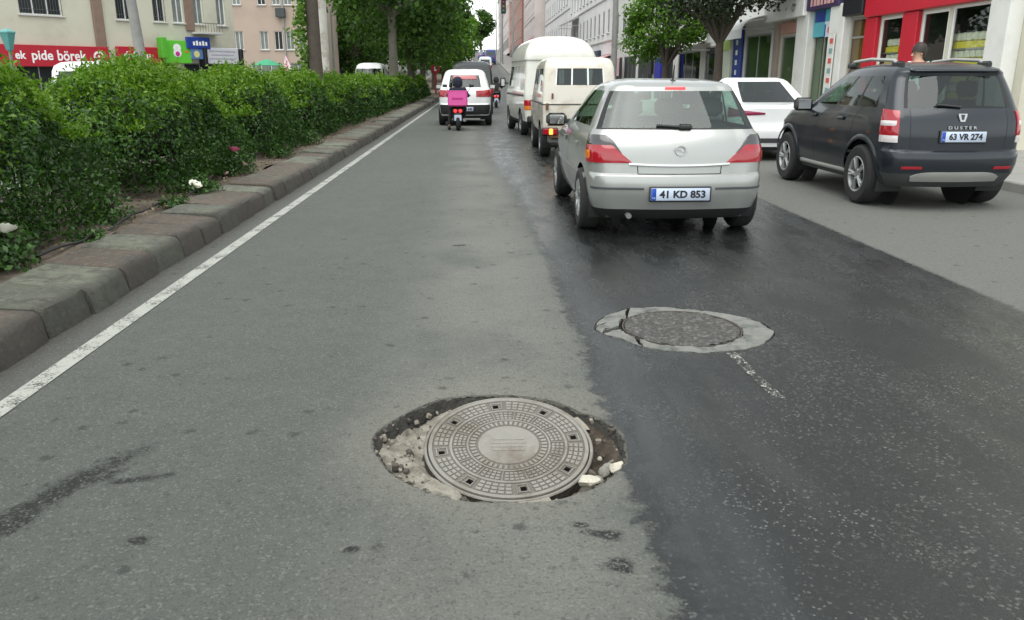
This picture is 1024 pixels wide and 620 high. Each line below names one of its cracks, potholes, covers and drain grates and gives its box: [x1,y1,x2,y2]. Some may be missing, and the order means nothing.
manhole cover [622,311,743,347]
manhole cover [422,398,595,503]
